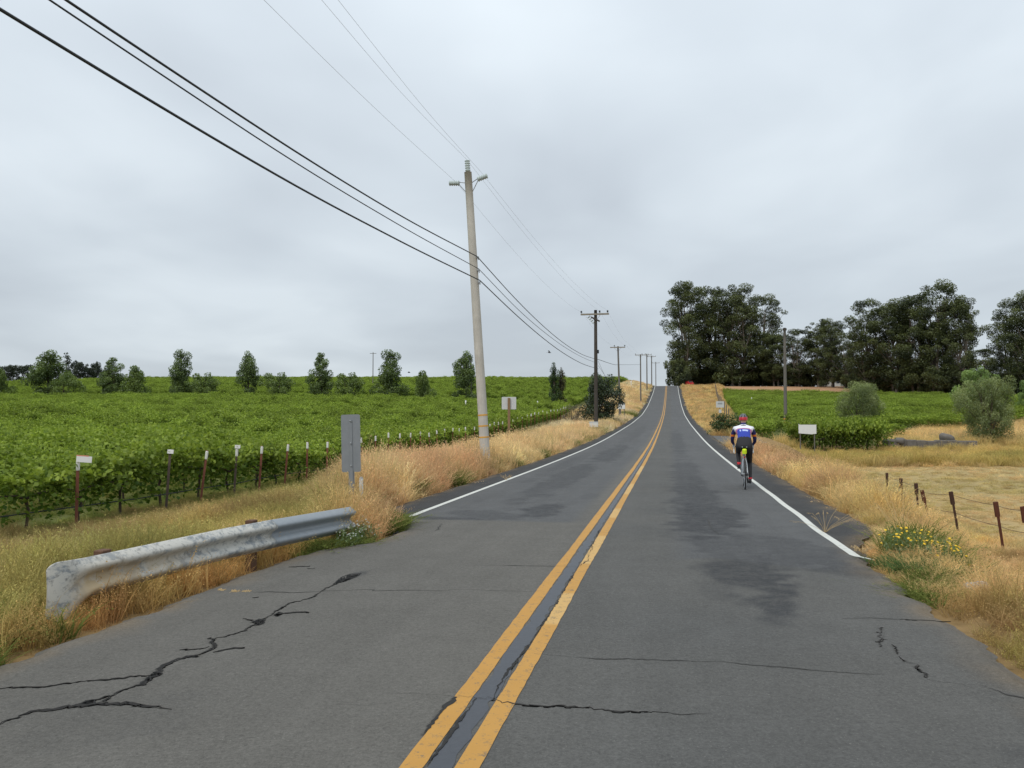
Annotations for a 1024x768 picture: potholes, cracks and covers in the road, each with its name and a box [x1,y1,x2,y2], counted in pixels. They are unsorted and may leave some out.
crack [875,618,1024,698]
crack [0,566,534,724]
crack [421,575,868,768]
